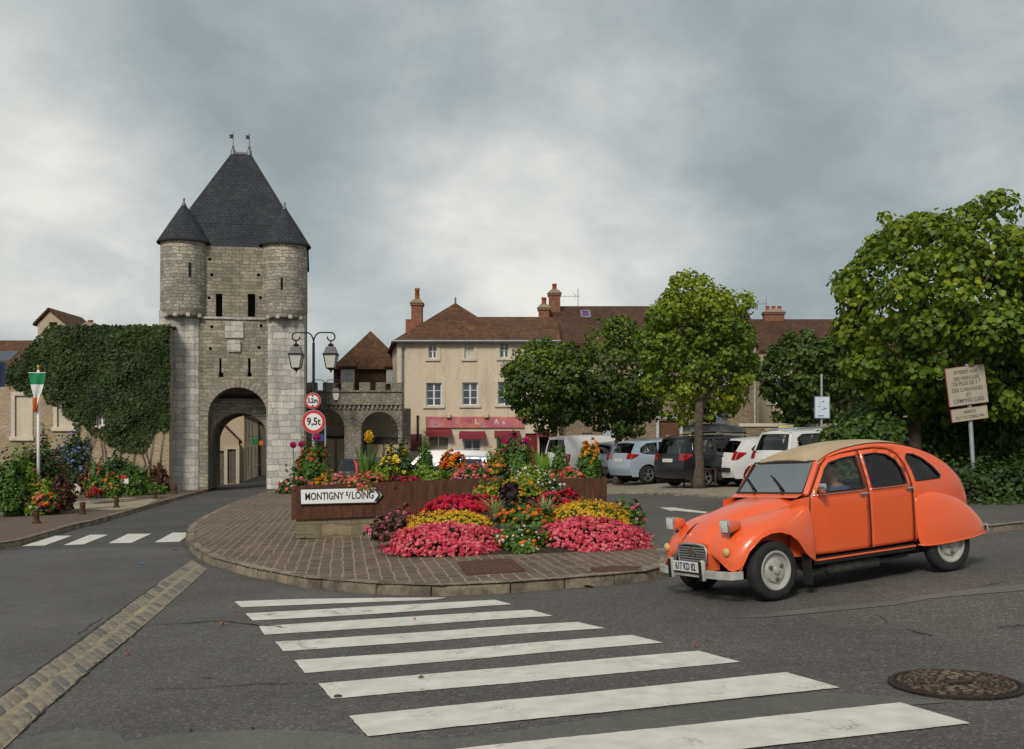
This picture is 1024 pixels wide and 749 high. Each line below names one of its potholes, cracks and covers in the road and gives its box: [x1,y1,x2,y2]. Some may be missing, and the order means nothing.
manhole cover [888,669,1024,701]
manhole cover [457,558,526,576]
